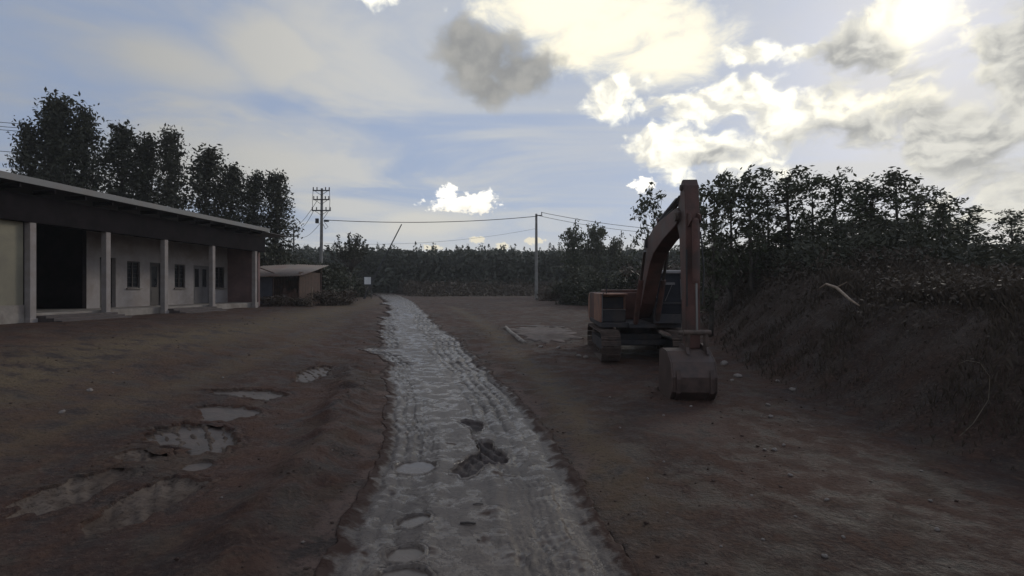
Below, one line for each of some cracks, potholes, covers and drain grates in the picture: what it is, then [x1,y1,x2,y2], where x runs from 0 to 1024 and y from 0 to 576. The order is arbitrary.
pothole [392,511,434,530]
pothole [448,438,512,480]
pothole [391,460,439,477]
pothole [0,461,145,525]
pothole [381,542,429,568]
pothole [64,472,221,544]
pothole [457,419,487,436]
pothole [130,420,248,459]
pothole [289,365,337,384]
pothole [170,458,223,475]
pothole [188,403,269,427]
pothole [194,387,295,402]
